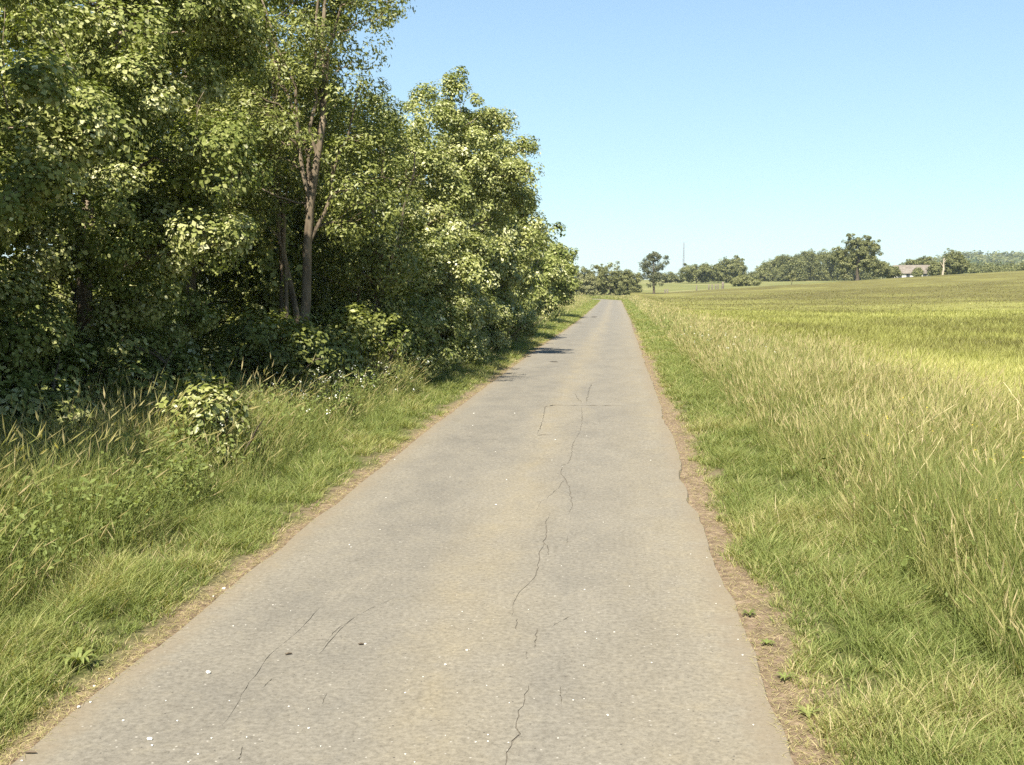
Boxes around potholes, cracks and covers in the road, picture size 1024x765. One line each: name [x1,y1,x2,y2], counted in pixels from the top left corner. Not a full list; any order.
crack [512,517,549,629]
crack [506,688,529,764]
crack [540,385,592,512]
crack [224,599,391,723]
